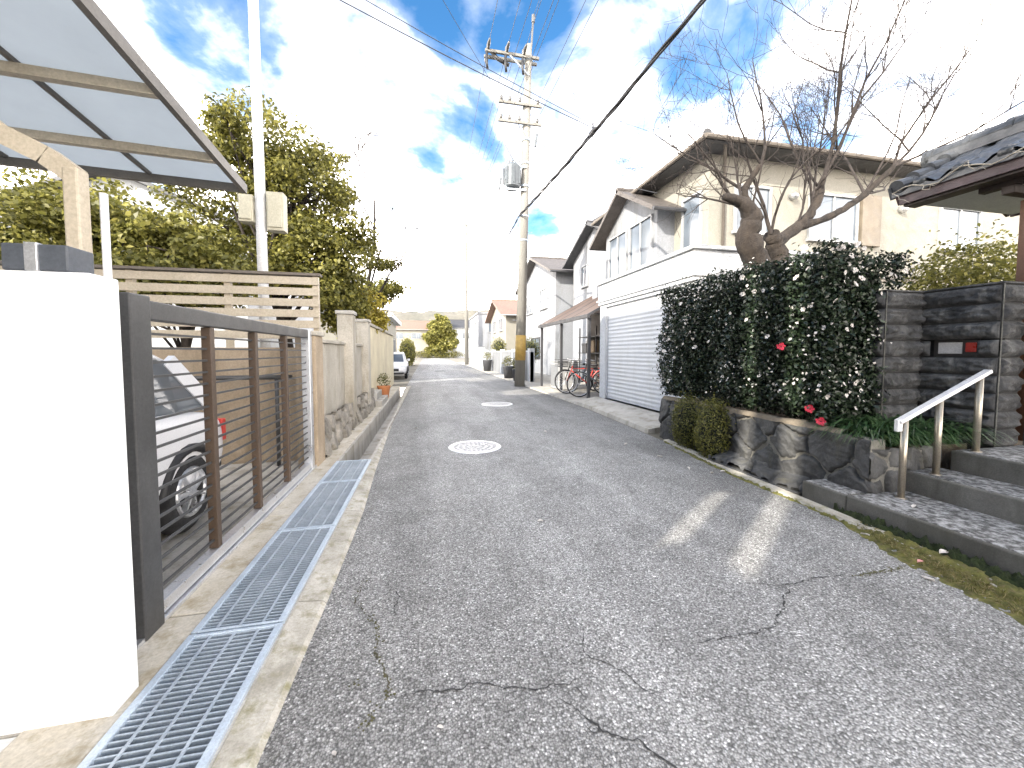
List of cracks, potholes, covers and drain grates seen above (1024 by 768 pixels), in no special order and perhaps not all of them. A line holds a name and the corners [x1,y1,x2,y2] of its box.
drain grate [319,459,371,482]
drain grate [191,526,335,635]
drain grate [278,480,360,531]
manhole cover [448,440,501,454]
crack [348,580,677,768]
crack [677,565,907,650]
drain grate [77,622,283,768]
